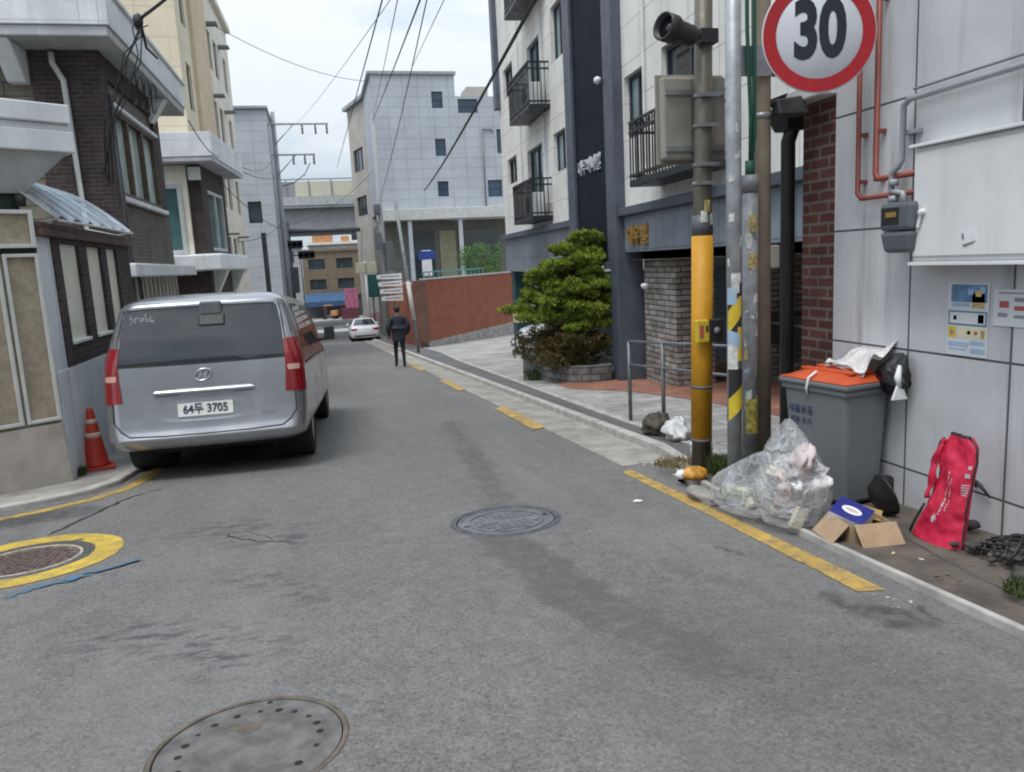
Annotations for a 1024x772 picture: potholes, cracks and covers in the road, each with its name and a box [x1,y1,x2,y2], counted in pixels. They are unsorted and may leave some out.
manhole cover [450,505,561,537]
crack [227,531,298,544]
manhole cover [143,696,349,772]
manhole cover [0,541,96,580]
